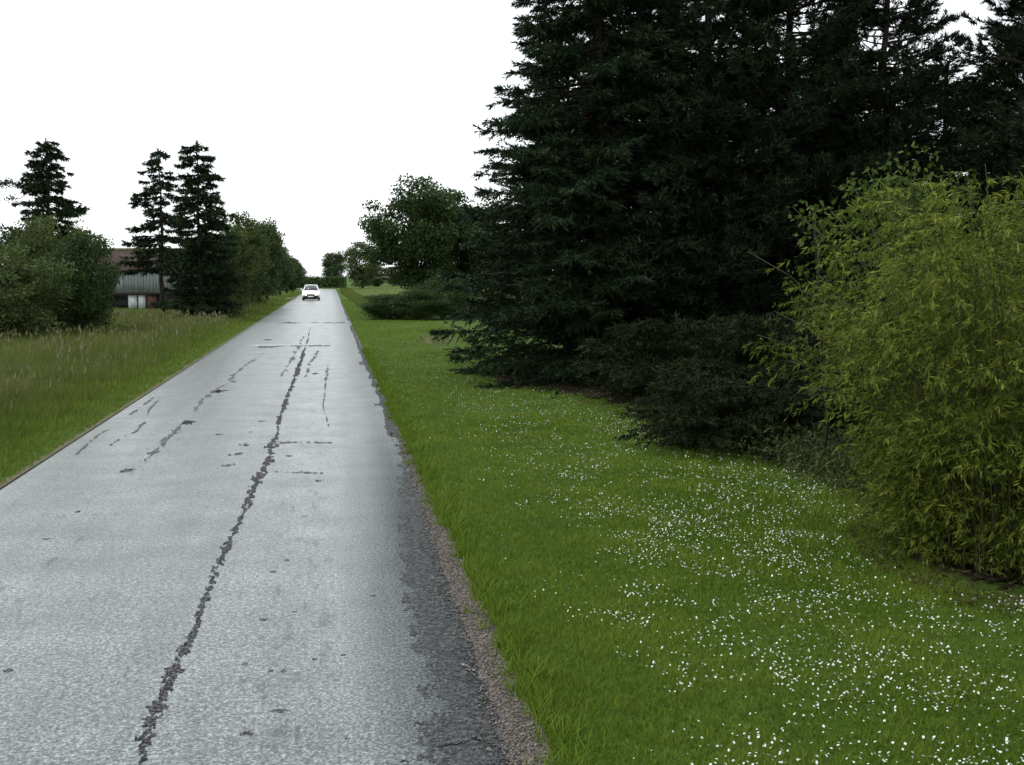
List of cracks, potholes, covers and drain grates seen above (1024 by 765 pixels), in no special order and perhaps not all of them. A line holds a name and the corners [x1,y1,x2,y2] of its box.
crack [74,322,346,765]
